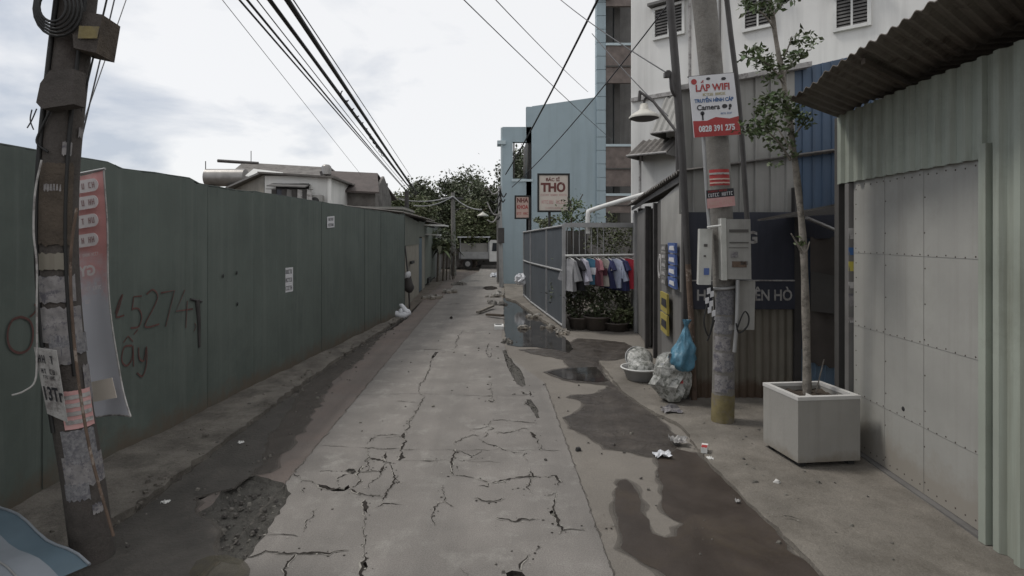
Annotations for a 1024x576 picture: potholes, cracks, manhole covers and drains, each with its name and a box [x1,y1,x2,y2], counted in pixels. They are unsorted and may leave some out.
pothole [197,474,291,565]
crack [243,332,585,576]
pothole [526,399,540,418]
pothole [502,350,526,387]
